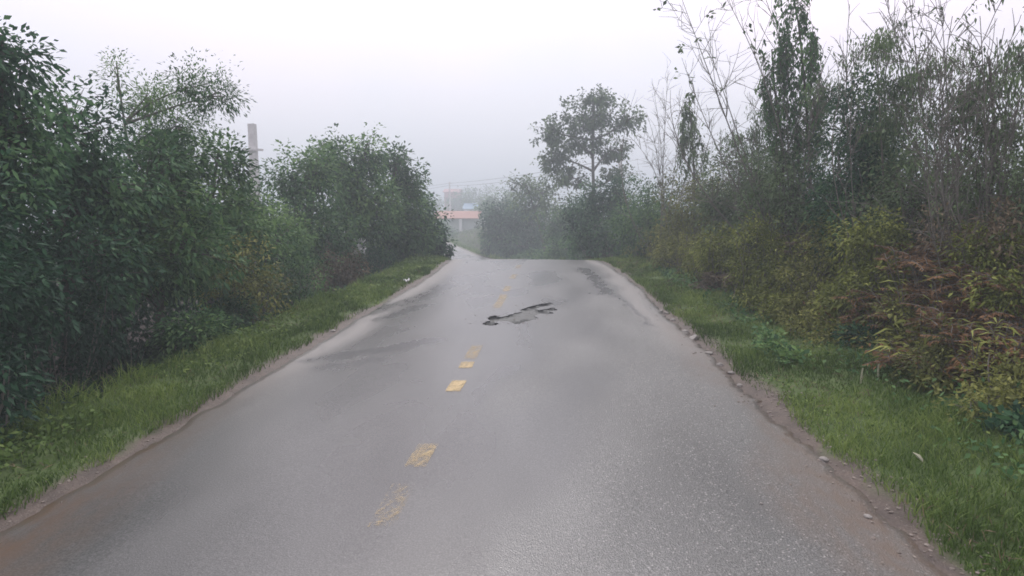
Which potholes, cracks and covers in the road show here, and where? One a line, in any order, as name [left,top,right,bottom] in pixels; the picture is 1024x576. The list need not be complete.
pothole [483,303,557,326]
